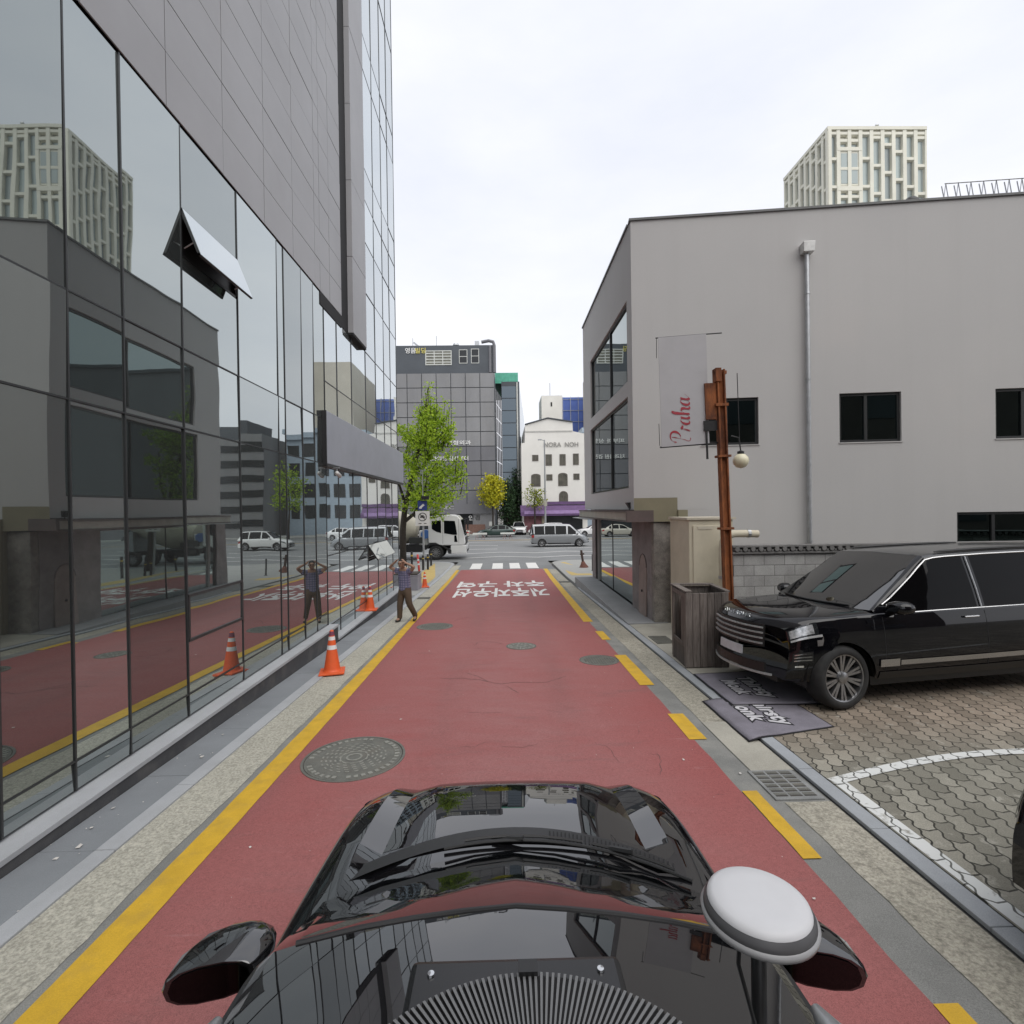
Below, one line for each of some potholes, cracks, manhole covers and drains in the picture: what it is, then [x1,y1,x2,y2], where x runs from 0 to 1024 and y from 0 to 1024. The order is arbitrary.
manhole cover [300,736,405,783]
manhole cover [579,655,619,666]
manhole cover [506,642,536,650]
drain grate [747,770,825,801]
